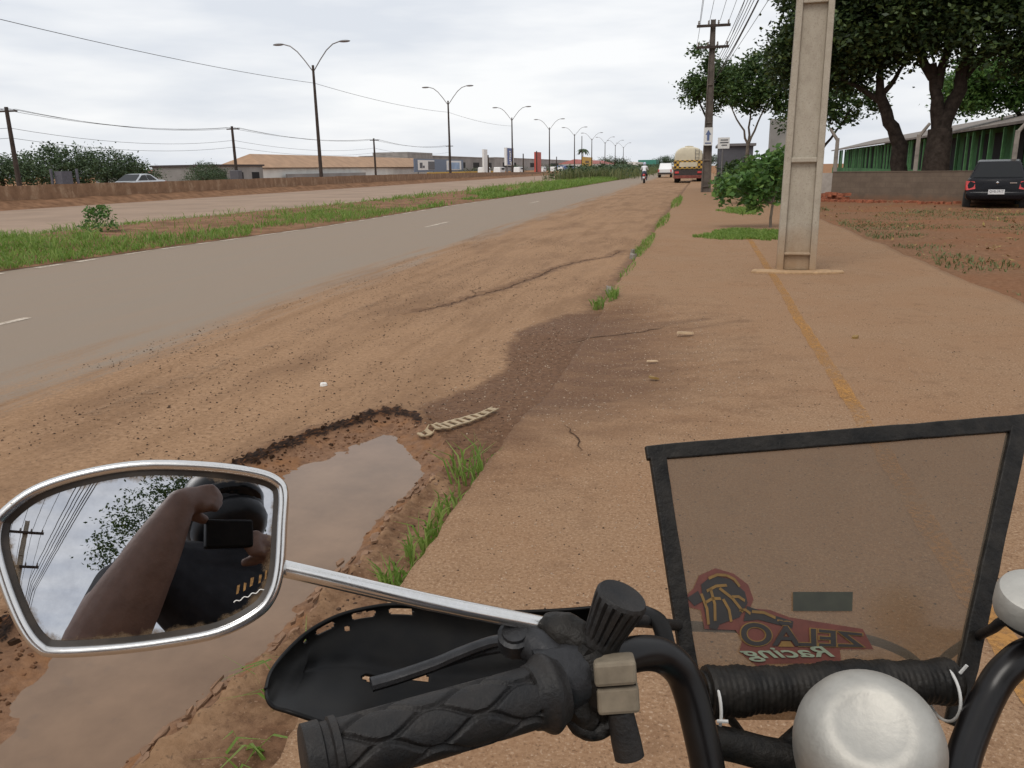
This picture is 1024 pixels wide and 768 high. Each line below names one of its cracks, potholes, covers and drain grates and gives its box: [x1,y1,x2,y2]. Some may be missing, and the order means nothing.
pothole [0,404,453,768]
crack [415,251,620,312]
